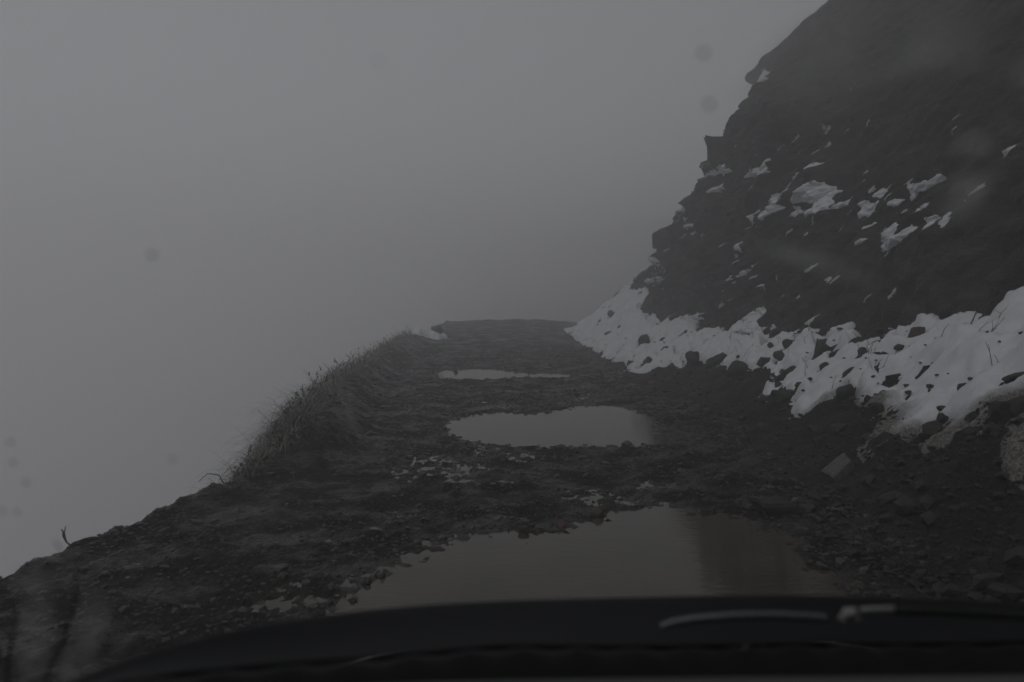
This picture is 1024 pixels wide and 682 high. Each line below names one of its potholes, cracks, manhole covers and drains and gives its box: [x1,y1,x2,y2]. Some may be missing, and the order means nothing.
pothole [292,500,867,661]
pothole [440,404,673,451]
pothole [435,368,584,380]
